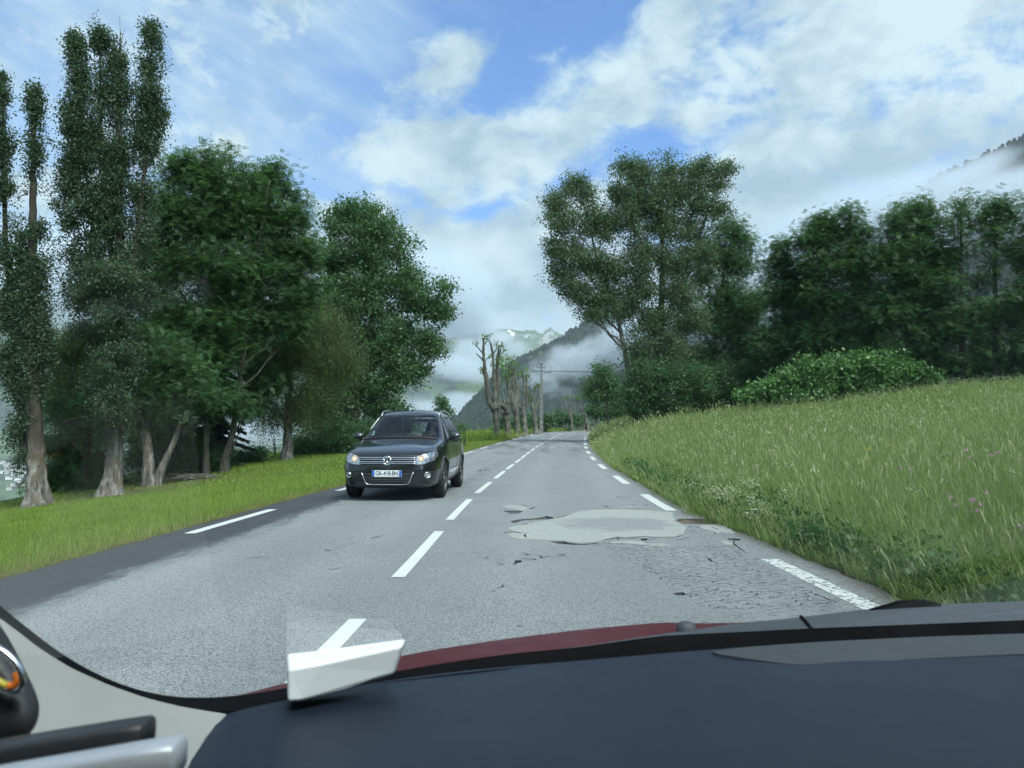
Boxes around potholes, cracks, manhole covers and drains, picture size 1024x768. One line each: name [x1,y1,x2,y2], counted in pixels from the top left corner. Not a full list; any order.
crack [601,527,840,612]
